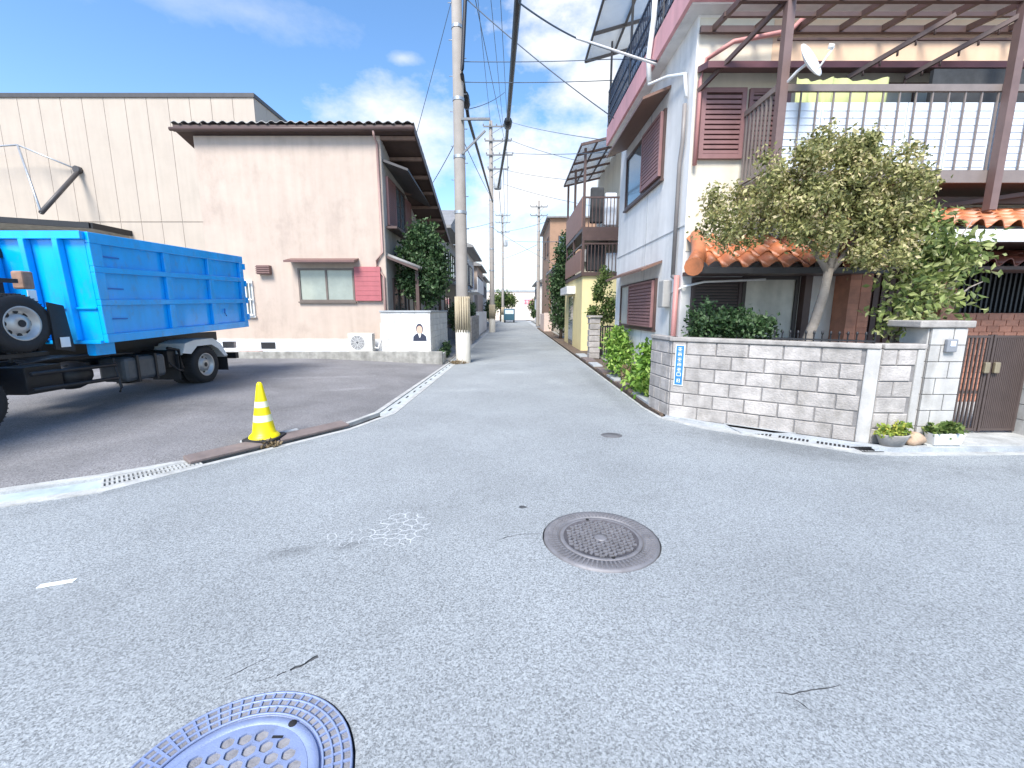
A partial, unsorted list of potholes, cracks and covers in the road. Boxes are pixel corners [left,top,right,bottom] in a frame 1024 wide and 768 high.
drain grate [101,462,203,488]
crack [776,685,839,712]
manhole cover [544,512,660,573]
crack [323,512,430,549]
crack [225,655,319,682]
manhole cover [130,691,354,768]
